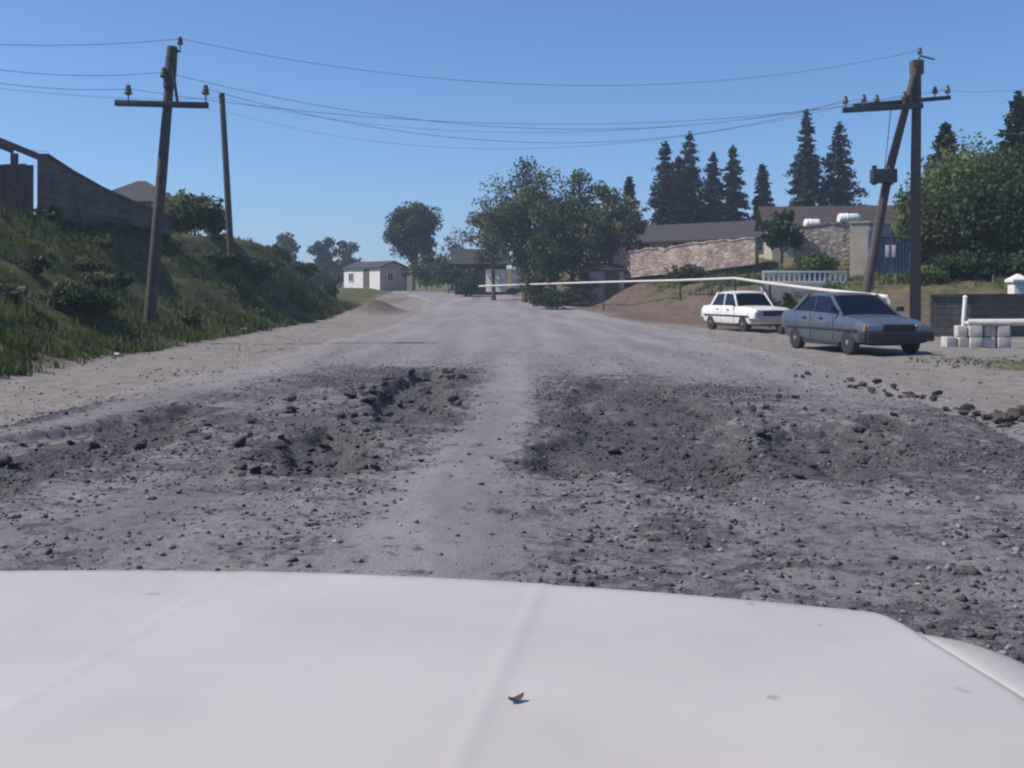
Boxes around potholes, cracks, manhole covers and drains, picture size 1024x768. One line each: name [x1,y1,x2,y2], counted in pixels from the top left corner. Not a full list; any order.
pothole [0,405,231,504]
pothole [853,414,953,437]
pothole [248,425,386,479]
pothole [508,382,774,495]
pothole [360,370,462,424]
pothole [751,421,928,481]
